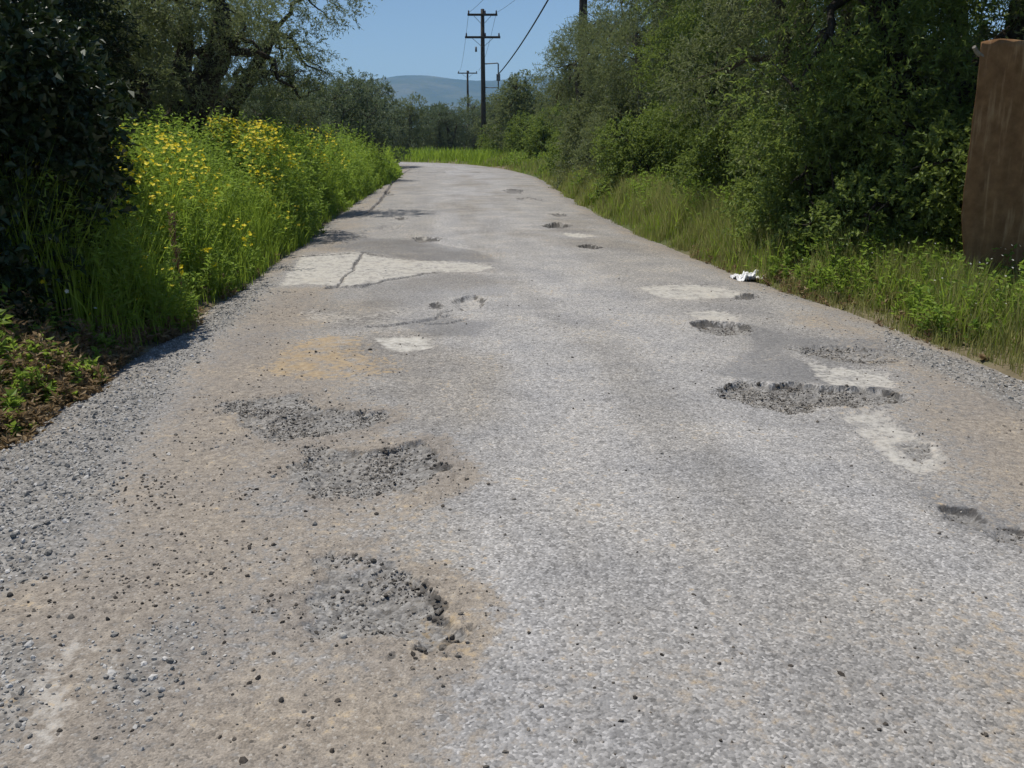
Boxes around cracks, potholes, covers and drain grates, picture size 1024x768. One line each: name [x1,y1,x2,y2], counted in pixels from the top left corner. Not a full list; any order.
crack [288,252,444,289]
pothole [709,379,909,415]
pothole [936,505,1024,546]
pothole [203,391,397,443]
pothole [452,295,487,311]
crack [367,310,468,328]
pothole [784,344,903,367]
pothole [286,545,478,661]
pothole [273,439,454,502]
pothole [688,320,759,337]
